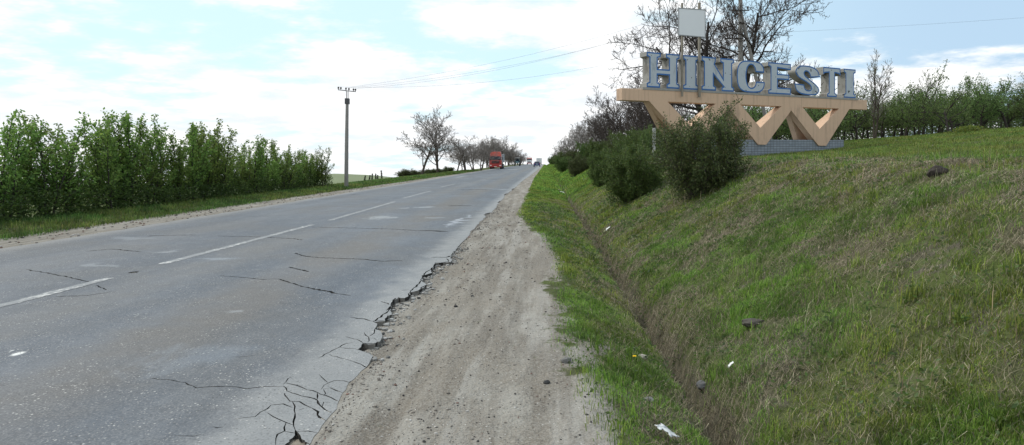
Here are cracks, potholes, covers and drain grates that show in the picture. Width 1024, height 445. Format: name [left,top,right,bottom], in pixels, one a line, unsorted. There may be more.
crack [328,256,450,367]
crack [153,376,351,445]
crack [239,236,377,295]
